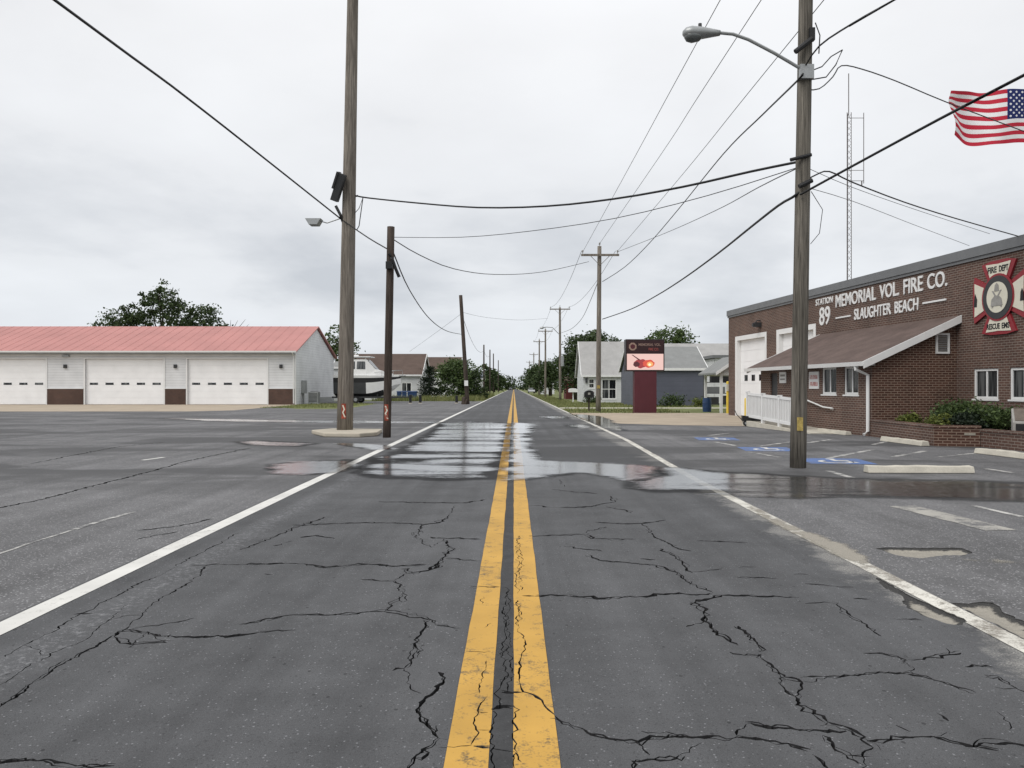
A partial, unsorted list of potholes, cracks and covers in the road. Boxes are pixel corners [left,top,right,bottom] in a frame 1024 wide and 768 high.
pothole [952,602,1024,639]
crack [0,448,249,508]
pothole [876,547,972,558]
crack [0,500,483,768]
crack [515,482,1024,768]
